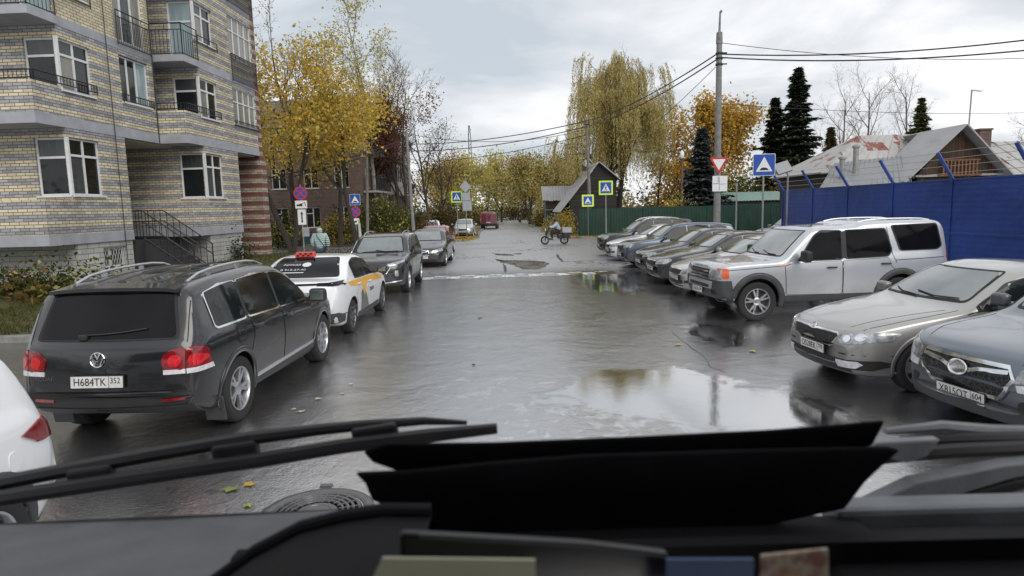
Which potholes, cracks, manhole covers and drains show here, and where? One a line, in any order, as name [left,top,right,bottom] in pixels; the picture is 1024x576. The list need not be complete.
pothole [496,259,549,270]
